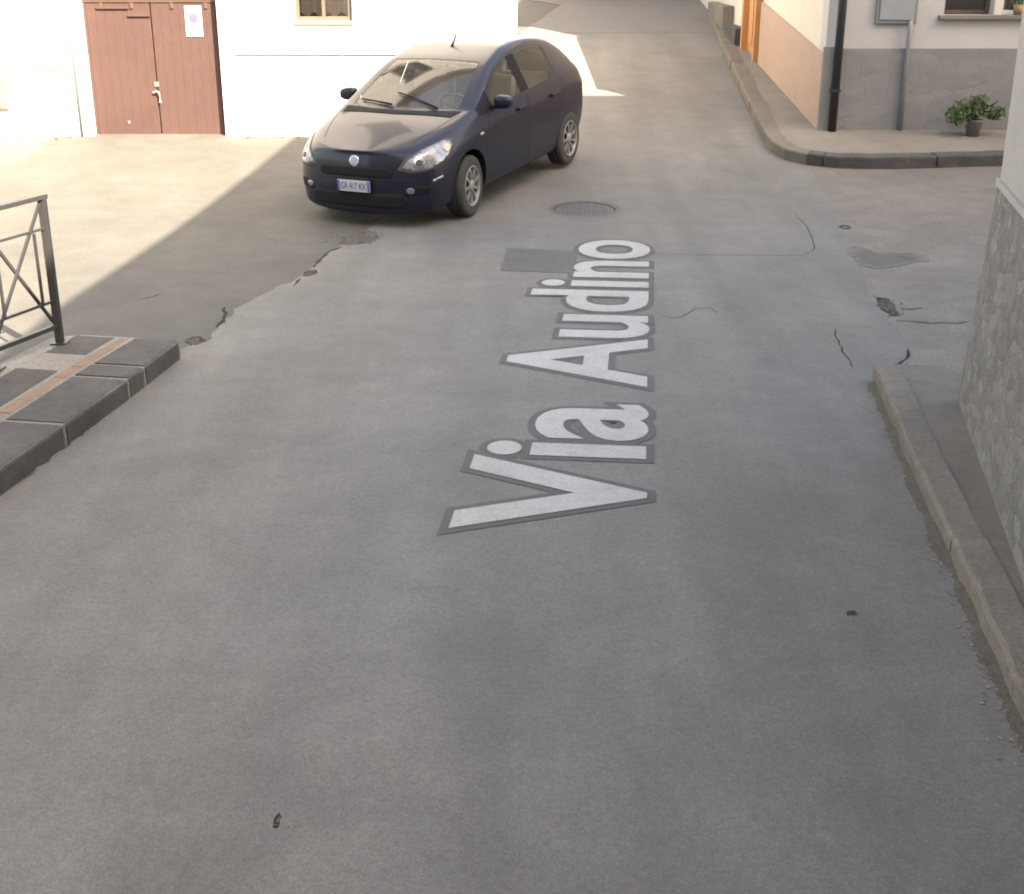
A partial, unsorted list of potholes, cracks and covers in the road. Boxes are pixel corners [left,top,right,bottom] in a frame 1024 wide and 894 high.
crack [293,247,340,286]
crack [834,328,853,367]
pothole [325,231,382,248]
crack [895,349,910,365]
pothole [870,295,904,317]
crack [216,307,227,327]
crack [896,308,966,324]
manhole cover [549,201,620,217]
crack [684,213,815,256]
